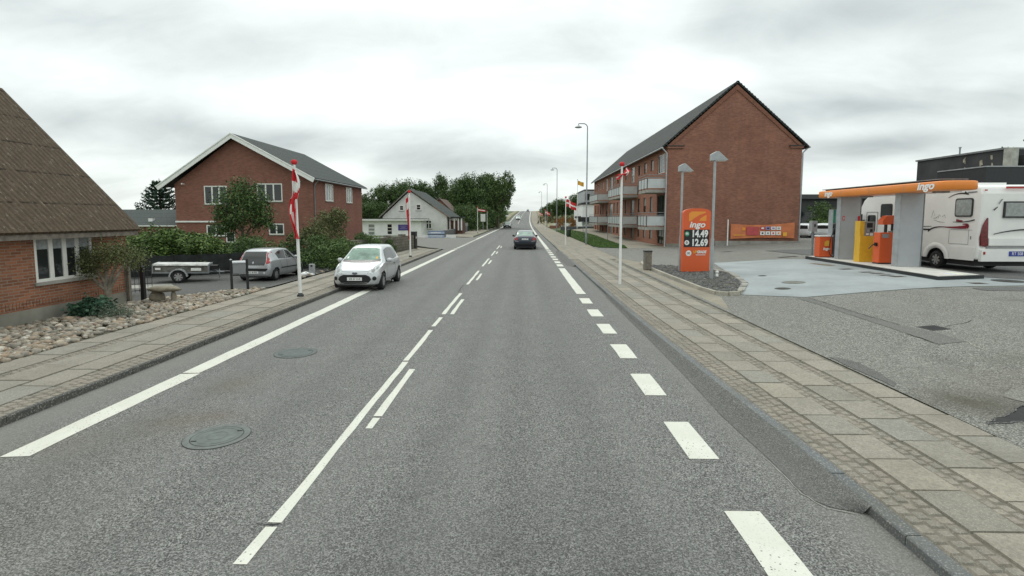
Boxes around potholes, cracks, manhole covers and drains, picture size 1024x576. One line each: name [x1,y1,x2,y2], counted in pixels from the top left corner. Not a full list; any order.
manhole cover [181,424,251,450]
manhole cover [274,348,317,358]
